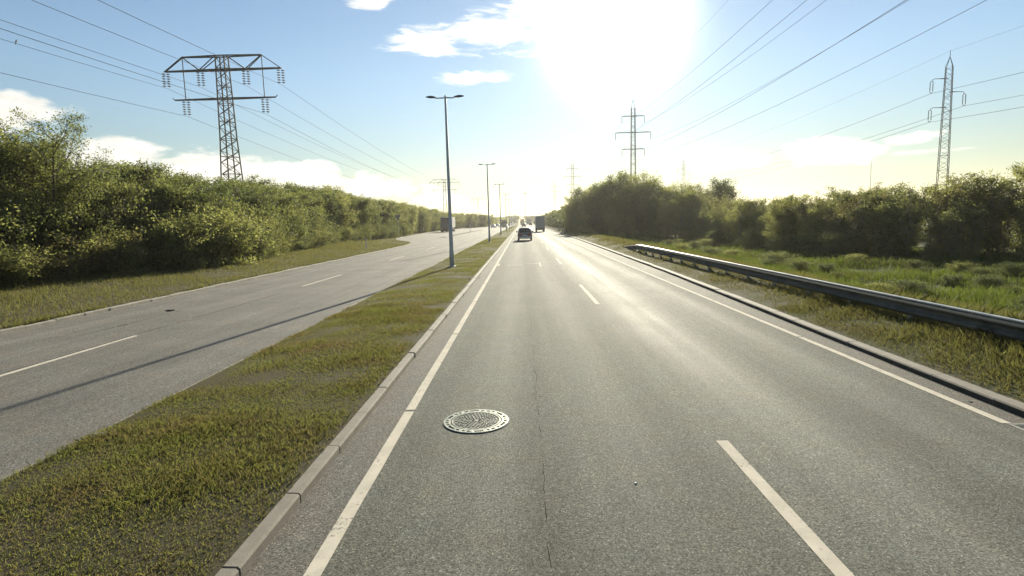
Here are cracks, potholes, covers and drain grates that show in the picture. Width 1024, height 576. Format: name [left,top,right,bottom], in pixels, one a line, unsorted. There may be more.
manhole cover [442,409,510,434]
